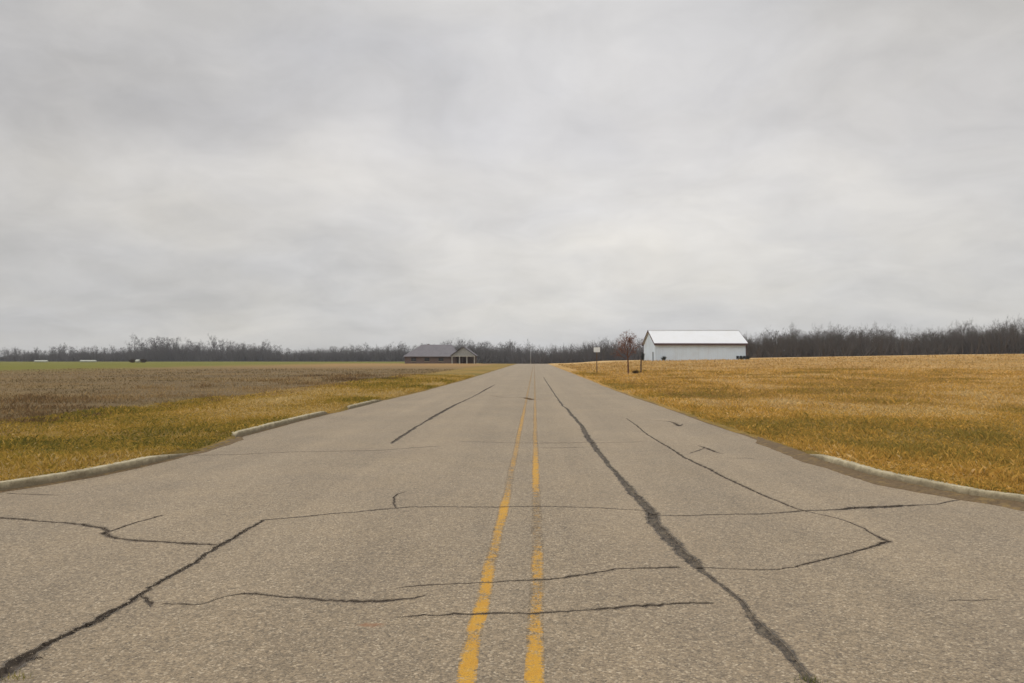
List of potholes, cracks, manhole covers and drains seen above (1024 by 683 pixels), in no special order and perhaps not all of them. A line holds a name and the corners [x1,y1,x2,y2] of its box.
crack [0,378,958,683]
